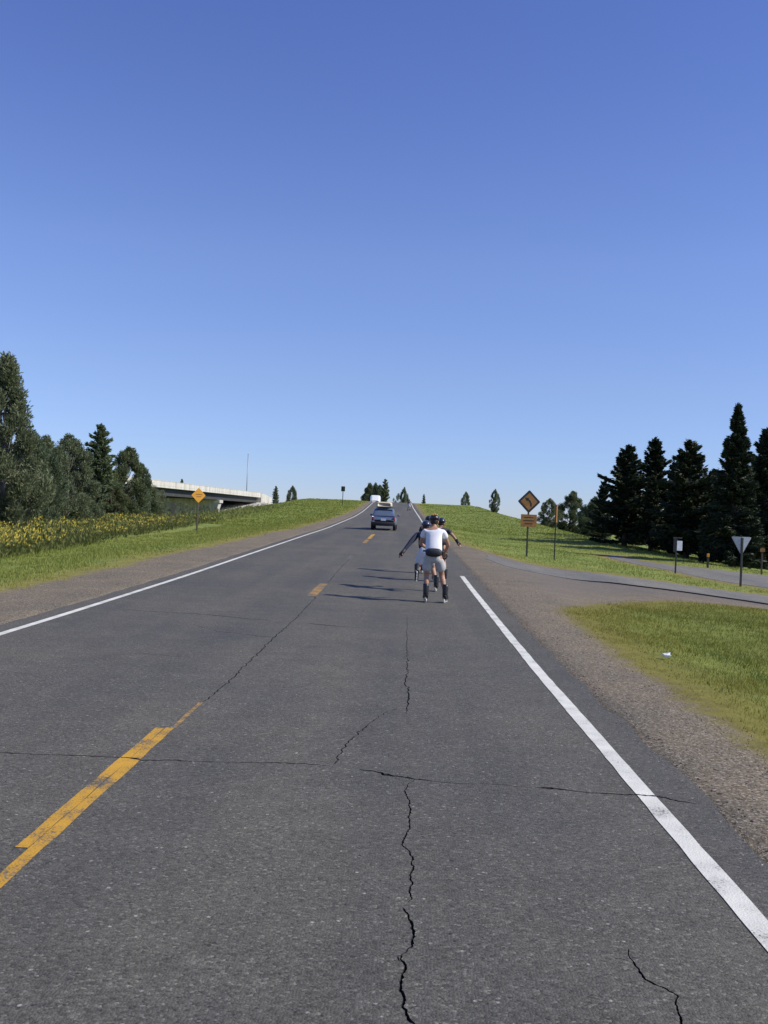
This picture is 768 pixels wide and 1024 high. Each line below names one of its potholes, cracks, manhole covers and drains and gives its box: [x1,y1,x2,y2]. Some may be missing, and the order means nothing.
crack [138,610,354,637]
crack [0,619,696,1024]
